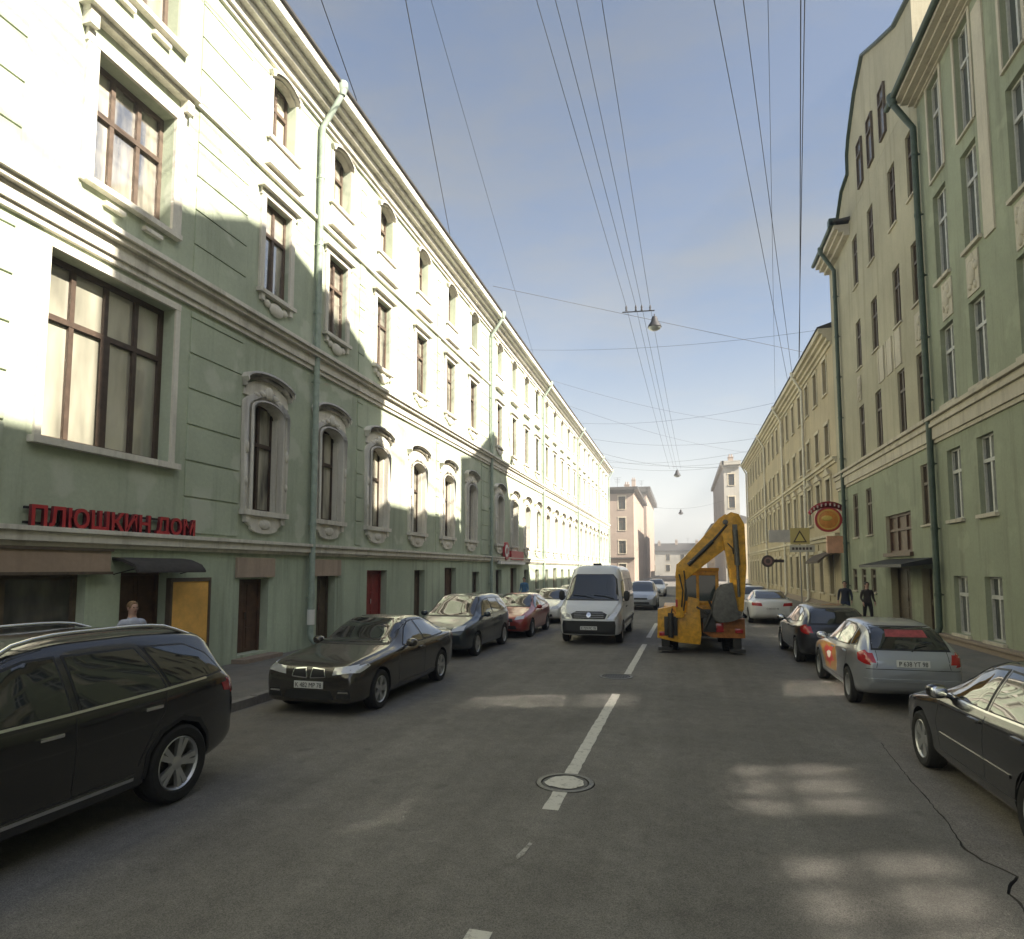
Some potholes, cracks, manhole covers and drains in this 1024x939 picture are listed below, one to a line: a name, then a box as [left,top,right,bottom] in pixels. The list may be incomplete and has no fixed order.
manhole cover [537,773,594,793]
crack [882,744,1024,912]
